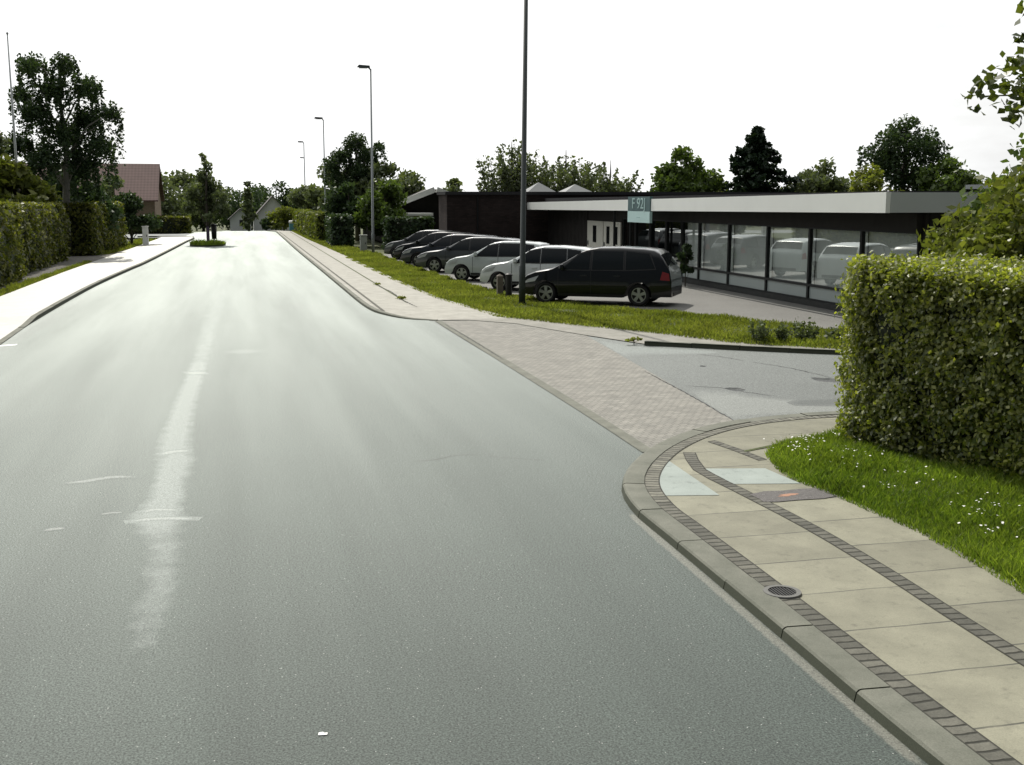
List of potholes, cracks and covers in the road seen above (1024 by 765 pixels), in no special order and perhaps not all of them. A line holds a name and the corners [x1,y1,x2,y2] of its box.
crack [412,454,547,462]
